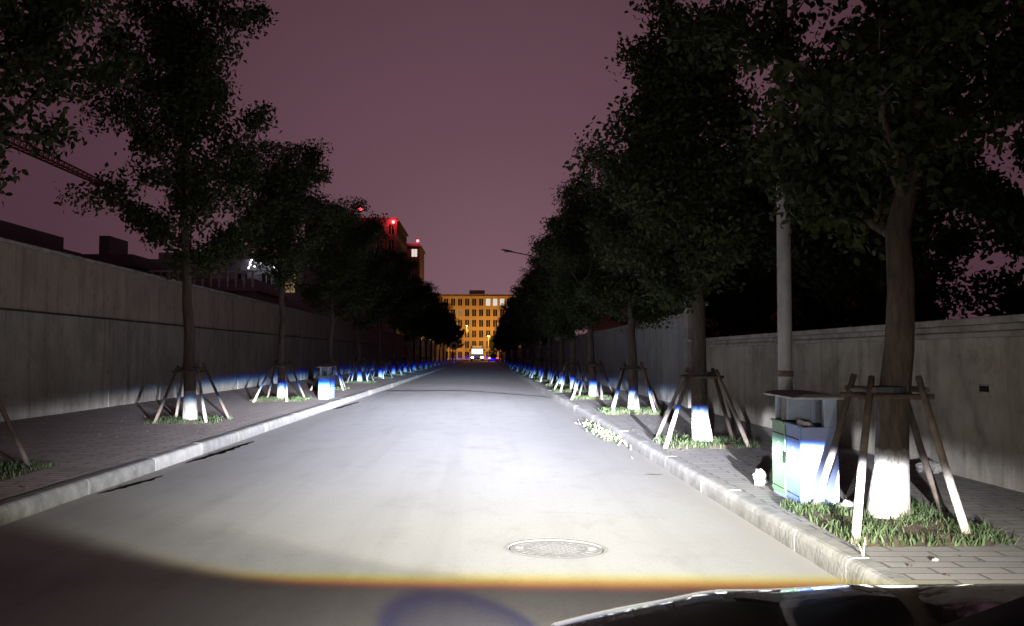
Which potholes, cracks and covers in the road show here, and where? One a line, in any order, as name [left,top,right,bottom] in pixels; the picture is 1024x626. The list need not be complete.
manhole cover [503,539,609,559]
